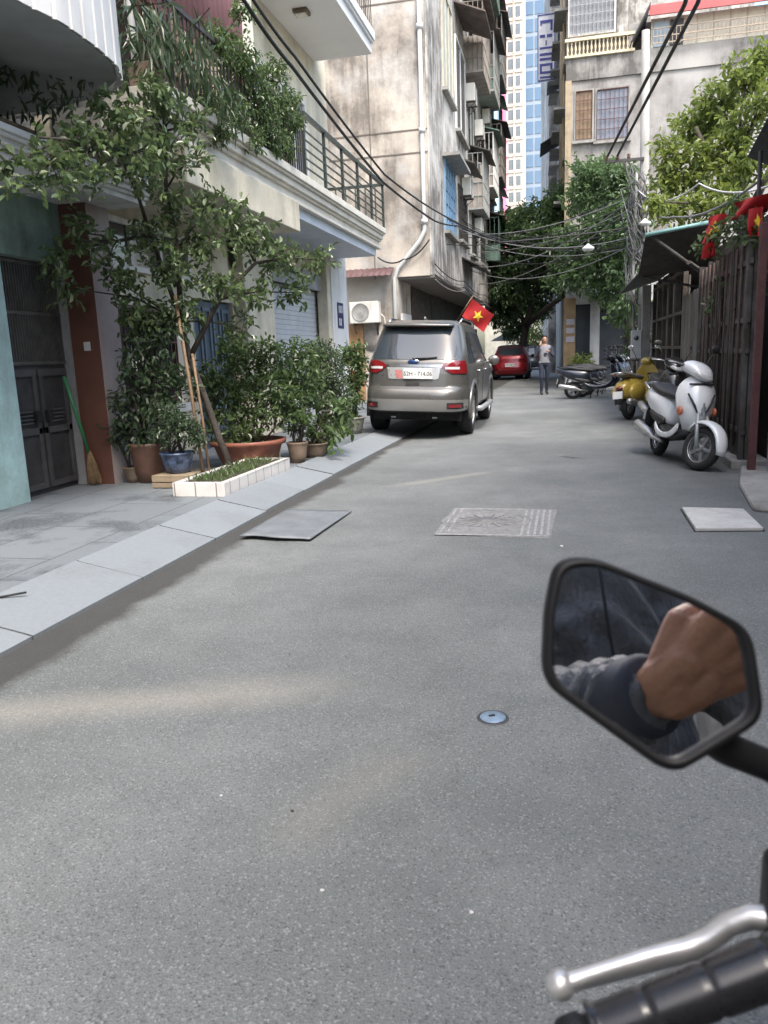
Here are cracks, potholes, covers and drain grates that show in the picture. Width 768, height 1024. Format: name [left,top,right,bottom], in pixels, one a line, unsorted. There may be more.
manhole cover [680,507,765,532]
manhole cover [477,710,509,725]
manhole cover [434,508,557,539]
manhole cover [240,509,352,540]
